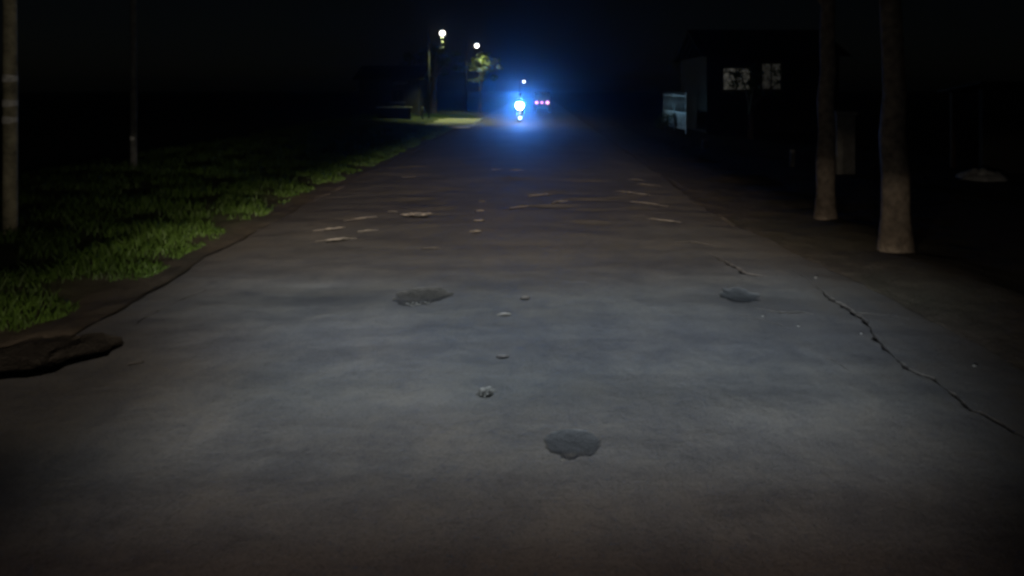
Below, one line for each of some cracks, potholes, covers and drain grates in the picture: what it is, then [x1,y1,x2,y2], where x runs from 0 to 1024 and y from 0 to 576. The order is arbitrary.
pothole [392,287,454,307]
crack [683,241,763,276]
crack [737,267,1024,438]
pothole [543,429,601,460]
pothole [718,287,761,303]
